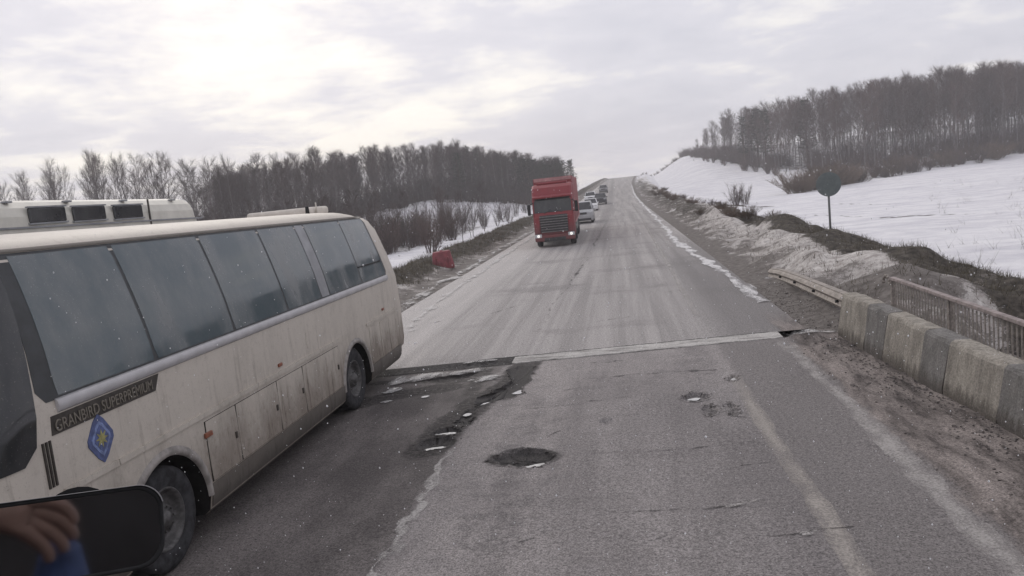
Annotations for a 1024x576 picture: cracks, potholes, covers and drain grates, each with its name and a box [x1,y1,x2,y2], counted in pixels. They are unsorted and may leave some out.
pothole [698,403,722,417]
pothole [719,401,741,417]
pothole [427,425,466,436]
pothole [419,372,480,382]
pothole [471,365,536,408]
pothole [451,407,478,427]
pothole [484,446,559,469]
pothole [413,434,462,452]
pothole [678,391,715,403]
